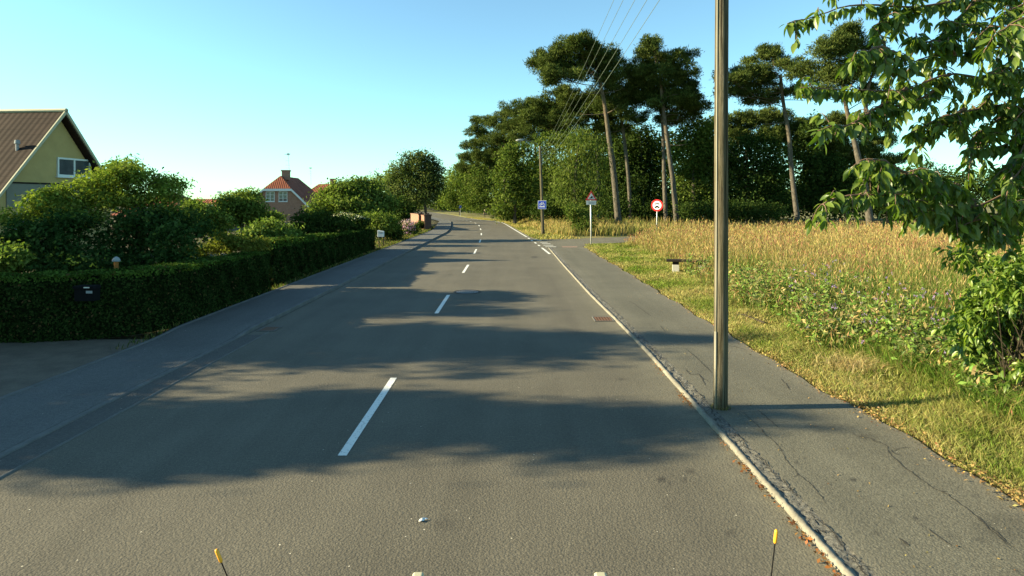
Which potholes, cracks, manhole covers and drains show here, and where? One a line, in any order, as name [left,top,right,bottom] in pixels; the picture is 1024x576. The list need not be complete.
crack [567,267,870,576]
crack [862,436,1022,554]
